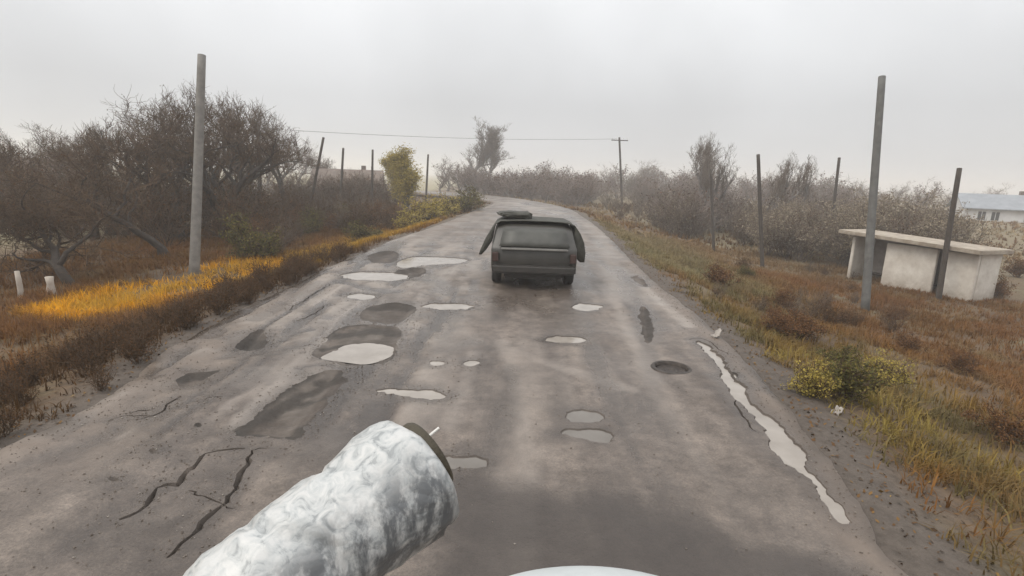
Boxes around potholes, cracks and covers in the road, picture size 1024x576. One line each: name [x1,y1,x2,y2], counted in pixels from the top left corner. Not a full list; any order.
pothole [445,454,489,469]
crack [118,448,267,558]
pothole [560,428,614,443]
pothole [376,388,447,400]
pothole [696,340,853,524]
crack [113,397,180,419]
pothole [341,271,409,281]
pothole [312,324,402,366]
pothole [565,409,605,423]
pothole [637,307,655,343]
pothole [571,303,603,311]
pothole [396,256,469,268]
